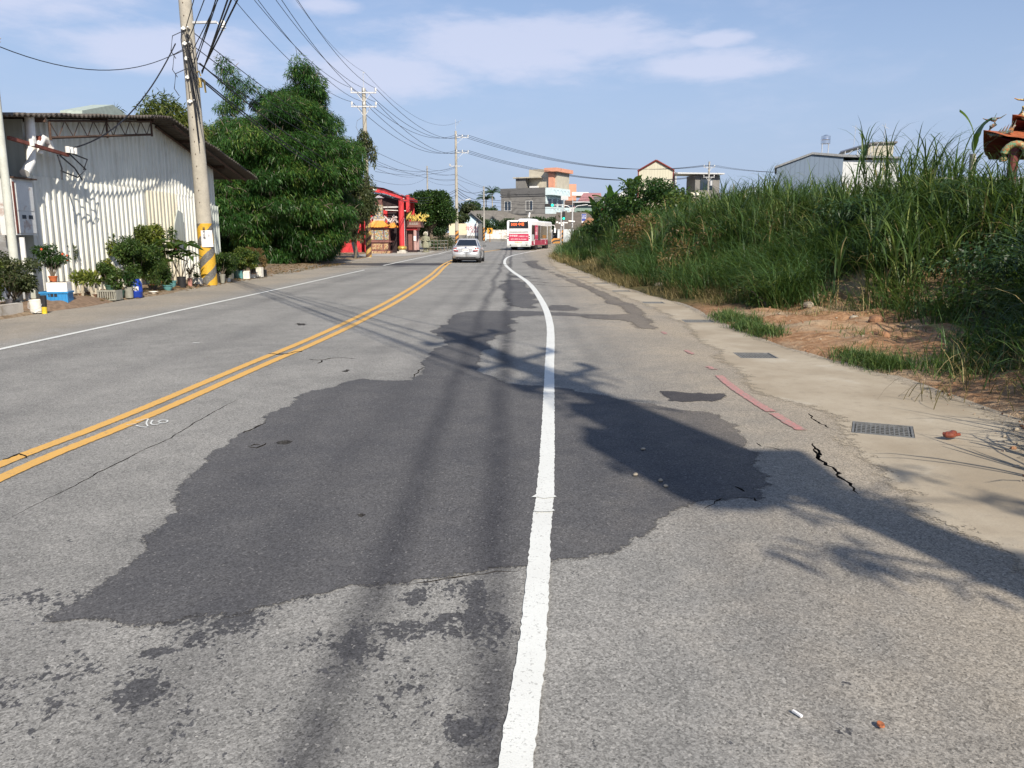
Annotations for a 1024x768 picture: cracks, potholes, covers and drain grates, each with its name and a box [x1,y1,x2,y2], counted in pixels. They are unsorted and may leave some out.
crack [809,414,858,494]
